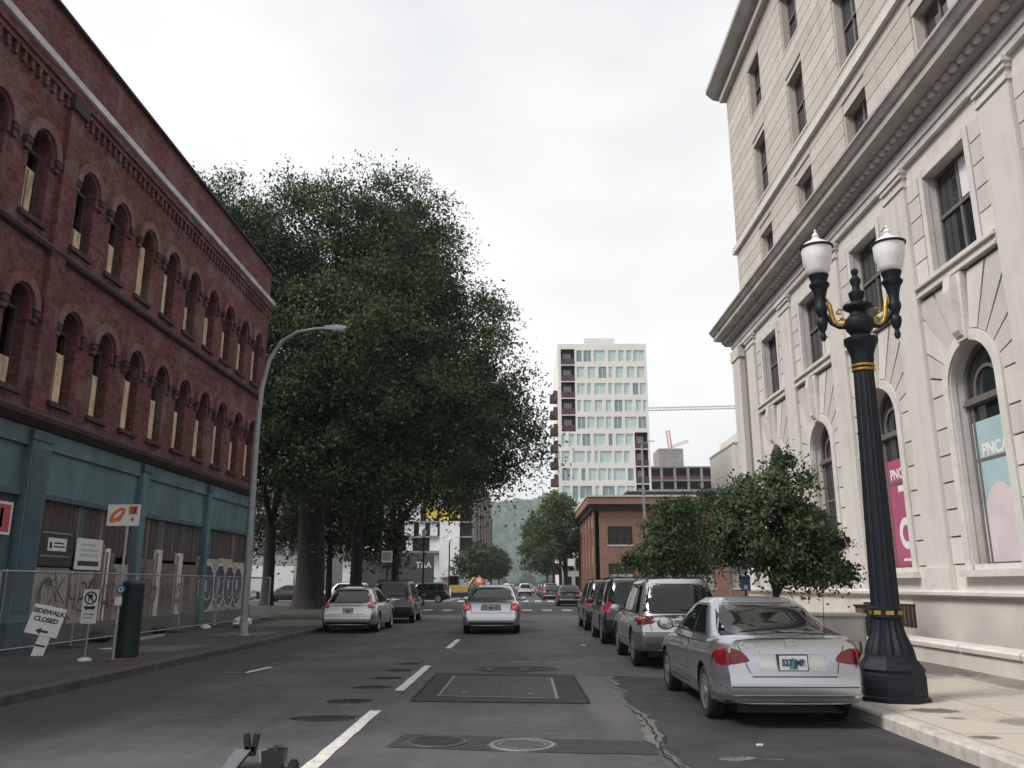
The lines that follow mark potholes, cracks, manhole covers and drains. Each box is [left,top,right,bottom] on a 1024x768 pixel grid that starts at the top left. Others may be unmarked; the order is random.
manhole cover [410,673,590,704]
manhole cover [405,735,468,748]
manhole cover [489,738,556,752]
crack [597,674,689,768]
